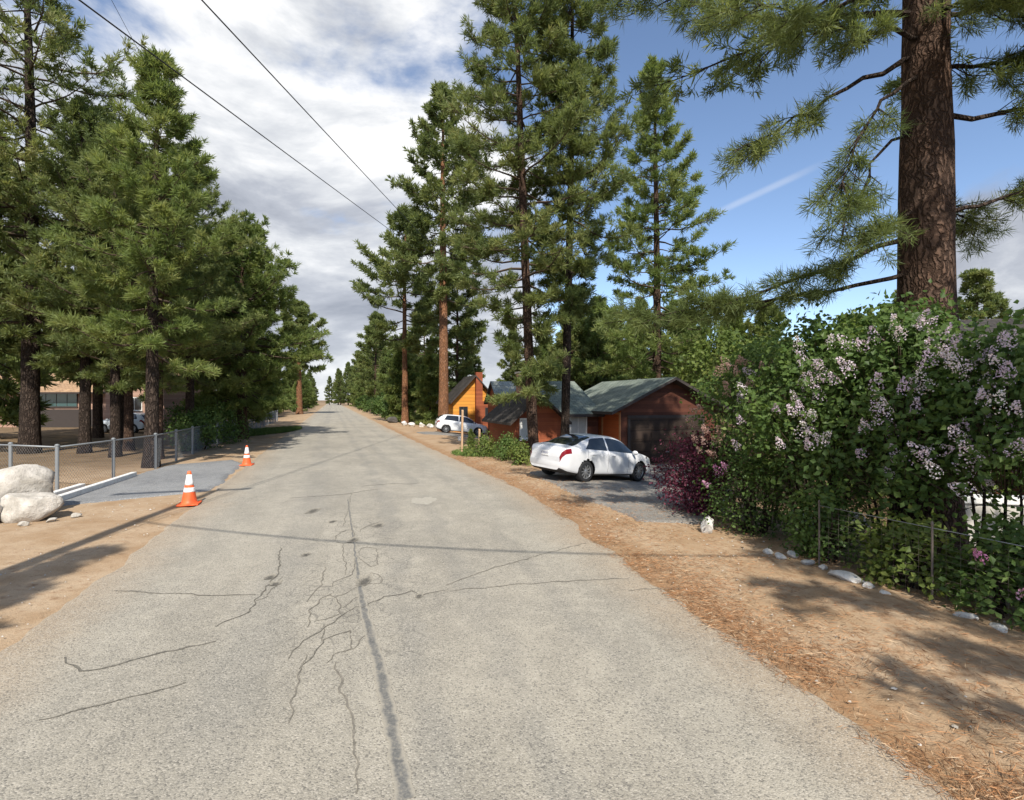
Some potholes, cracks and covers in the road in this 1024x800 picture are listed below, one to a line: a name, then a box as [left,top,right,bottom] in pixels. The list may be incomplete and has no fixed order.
crack [288,483,678,794]
crack [39,682,186,720]
crack [64,547,283,672]
